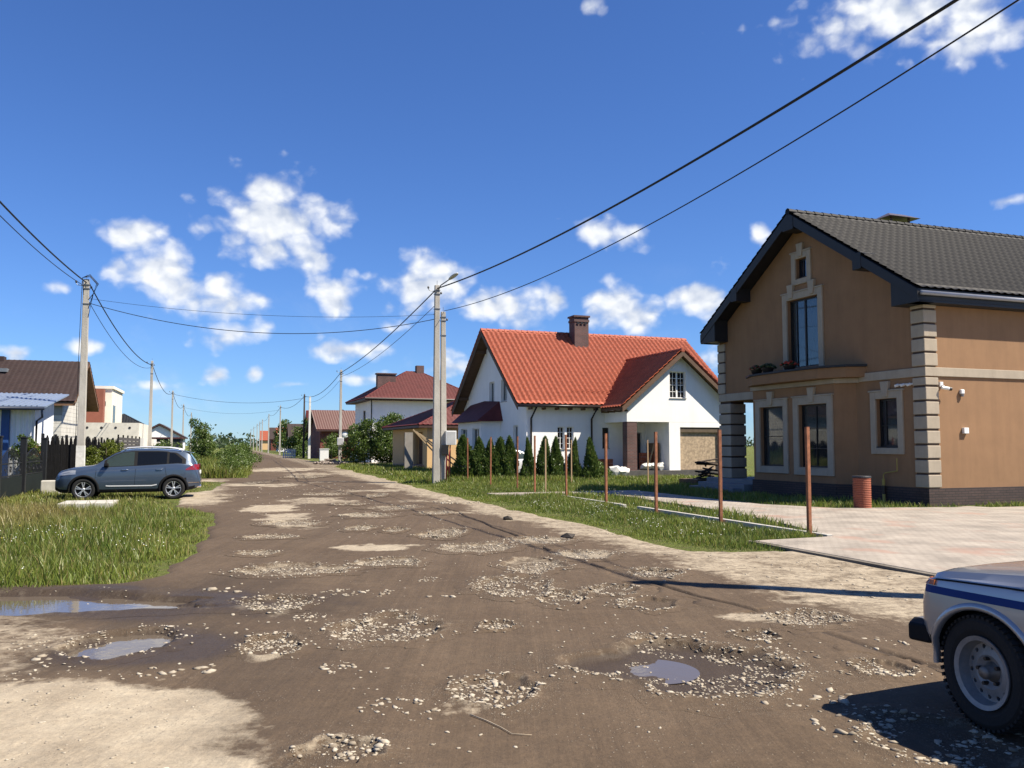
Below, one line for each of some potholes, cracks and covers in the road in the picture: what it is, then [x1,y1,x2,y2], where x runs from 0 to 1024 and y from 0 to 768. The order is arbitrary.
pothole [508,627,857,719]
pothole [454,570,565,604]
pothole [428,669,557,718]
pothole [0,584,311,624]
pothole [18,623,205,670]
pothole [614,566,696,581]
pothole [422,539,527,555]
pothole [208,561,371,579]
pothole [225,630,316,662]
pothole [747,607,870,630]
pothole [527,588,596,611]
pothole [574,583,651,598]
